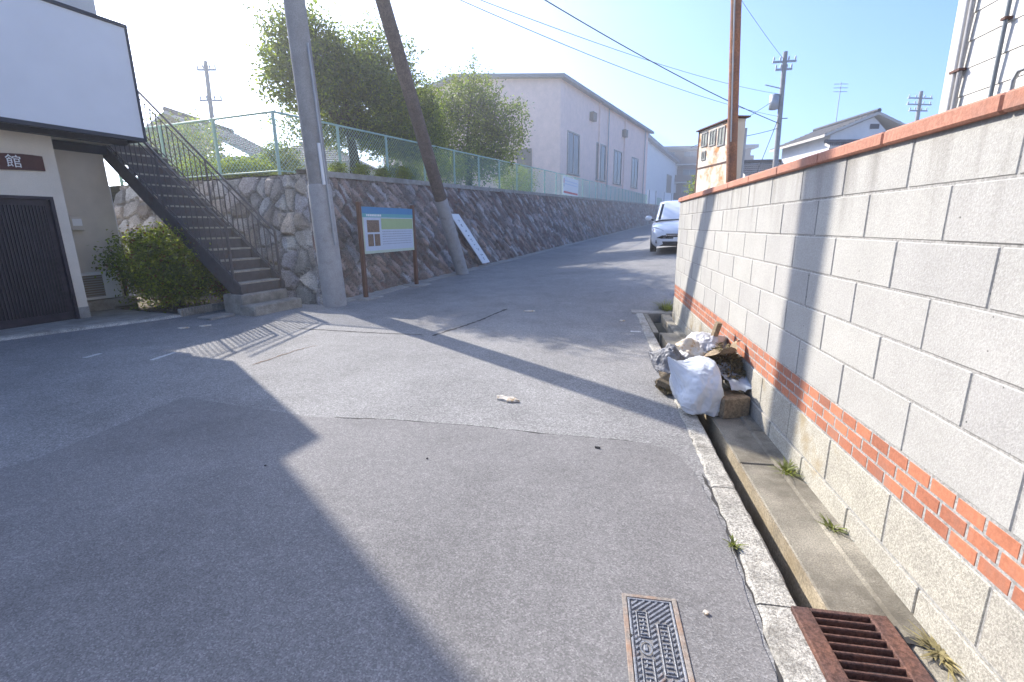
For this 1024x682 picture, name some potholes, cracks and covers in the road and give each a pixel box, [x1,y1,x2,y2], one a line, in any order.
manhole cover [622,593,695,682]
drain grate [791,606,935,682]
